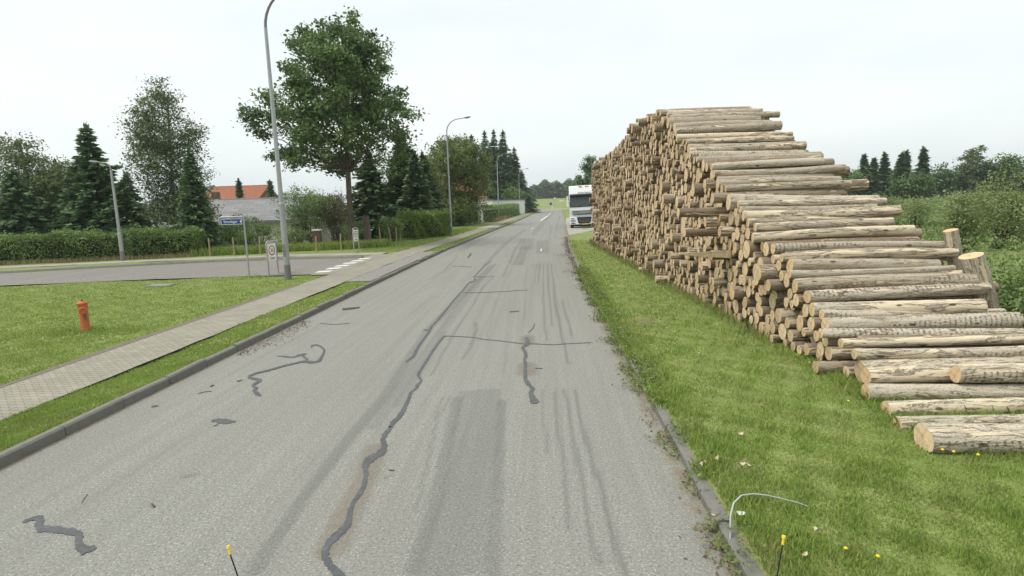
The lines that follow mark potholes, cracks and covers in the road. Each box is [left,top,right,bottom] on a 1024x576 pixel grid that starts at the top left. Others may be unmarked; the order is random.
crack [461,253,521,293]
